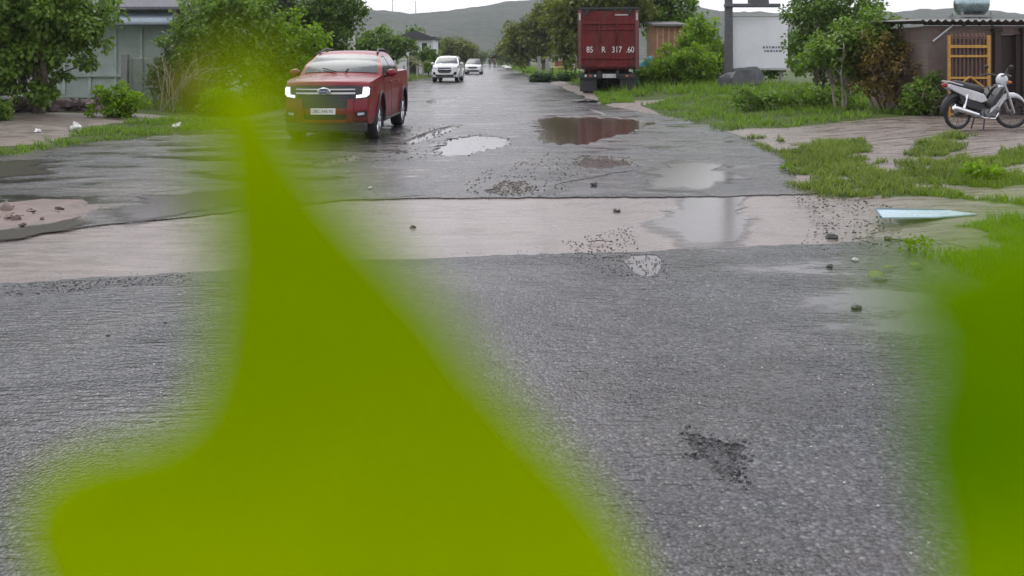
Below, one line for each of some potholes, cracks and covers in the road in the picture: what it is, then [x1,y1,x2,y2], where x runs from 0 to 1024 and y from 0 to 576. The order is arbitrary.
pothole [624,254,662,277]
pothole [432,134,515,156]
pothole [531,115,658,145]
pothole [485,179,539,196]
pothole [572,154,639,170]
pothole [679,424,754,489]
